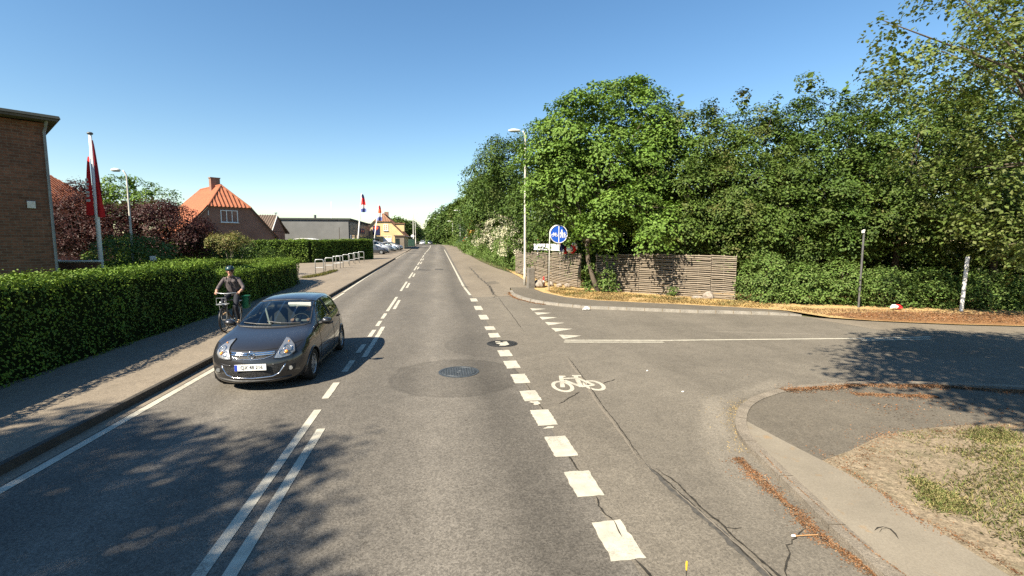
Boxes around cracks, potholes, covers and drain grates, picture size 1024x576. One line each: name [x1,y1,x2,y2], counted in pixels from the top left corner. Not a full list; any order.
crack [635,463,804,576]
manhole cover [438,366,479,378]
crack [596,497,622,536]
